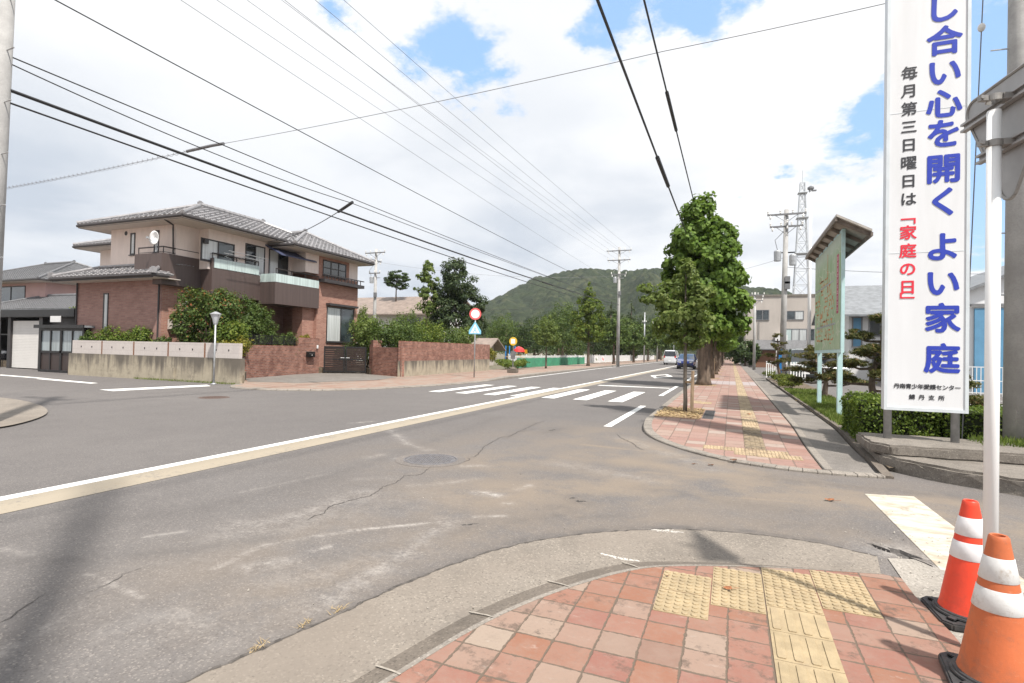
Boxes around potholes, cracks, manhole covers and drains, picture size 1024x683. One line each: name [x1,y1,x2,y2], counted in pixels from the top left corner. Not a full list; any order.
manhole cover [395,453,466,467]
